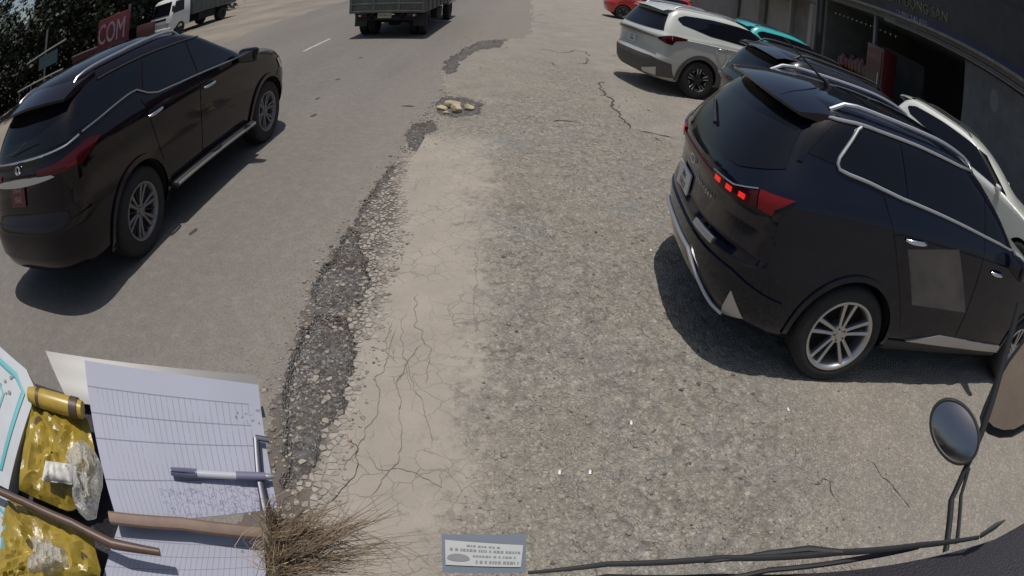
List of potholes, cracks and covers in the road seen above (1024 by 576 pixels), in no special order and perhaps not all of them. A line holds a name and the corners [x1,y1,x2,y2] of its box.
pothole [405,120,439,152]
pothole [442,39,508,74]
pothole [311,225,374,315]
pothole [435,96,485,118]
pothole [279,311,358,490]
crack [598,82,673,141]
crack [319,294,443,510]
pothole [354,164,397,227]
